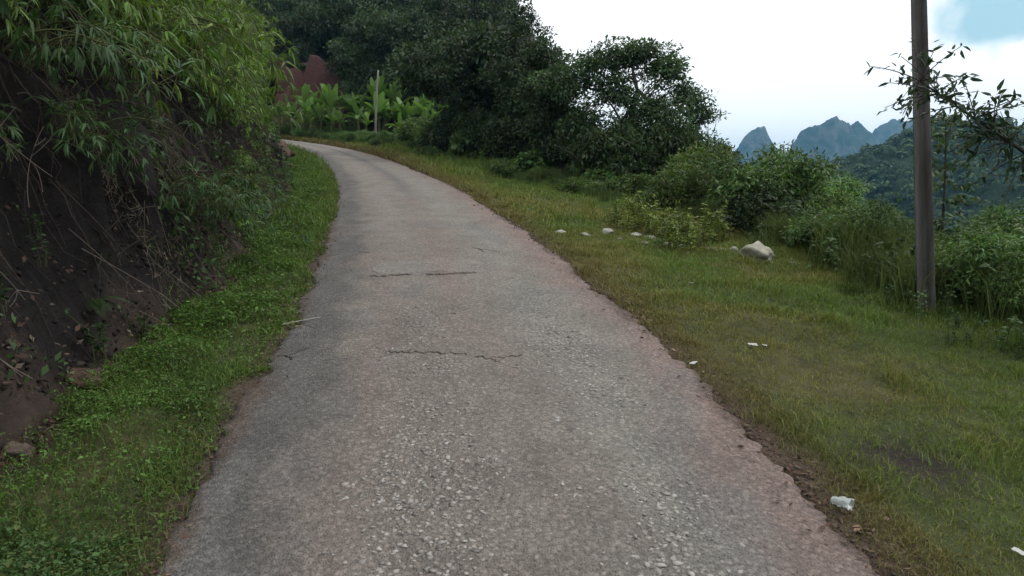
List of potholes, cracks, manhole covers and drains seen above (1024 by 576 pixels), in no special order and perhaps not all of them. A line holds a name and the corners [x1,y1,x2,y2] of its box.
crack [389,349,521,362]
